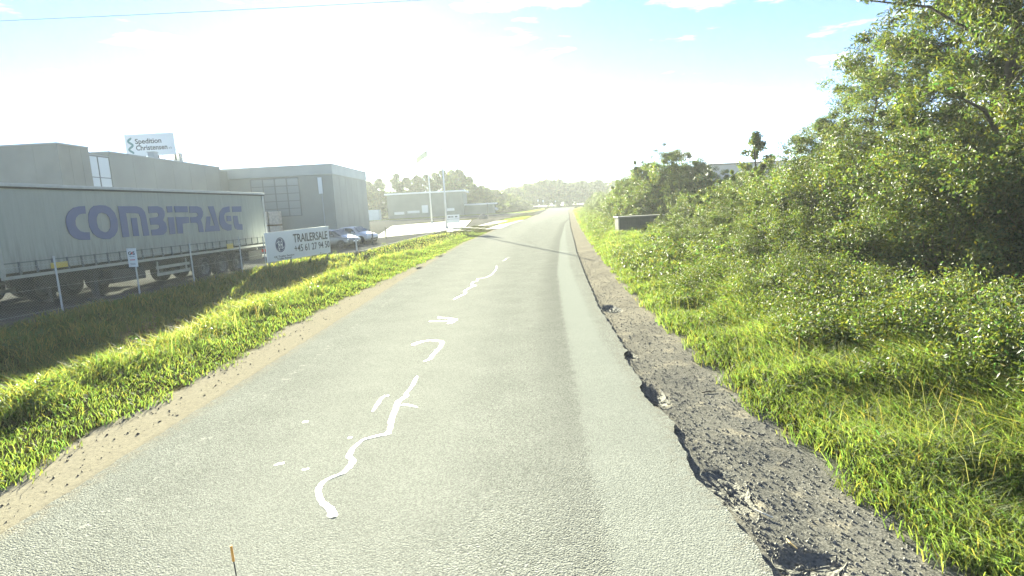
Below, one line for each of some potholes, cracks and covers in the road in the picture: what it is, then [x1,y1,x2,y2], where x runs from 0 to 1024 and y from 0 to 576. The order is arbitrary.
pothole [641,385,672,410]
